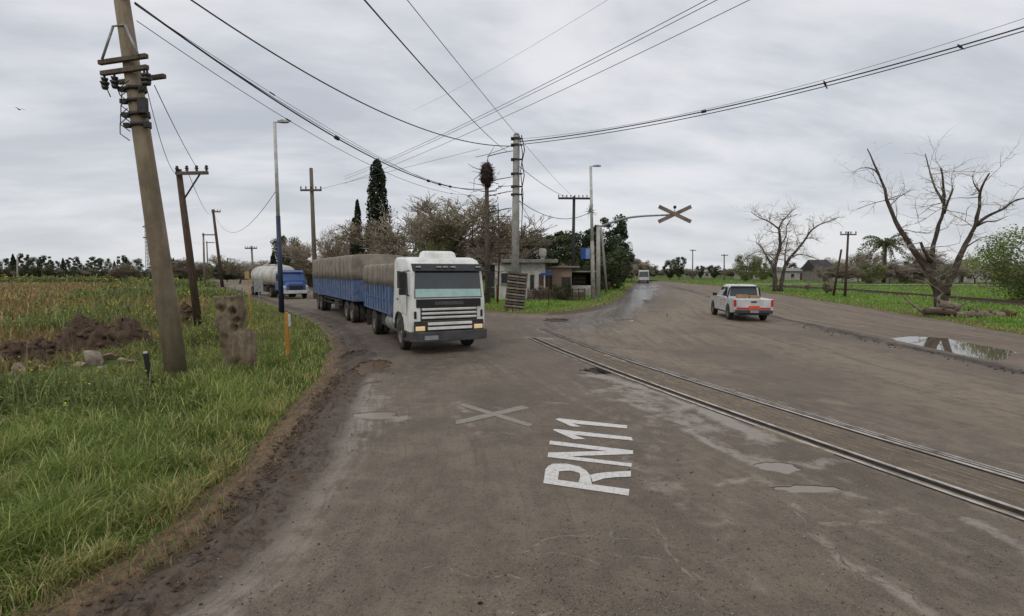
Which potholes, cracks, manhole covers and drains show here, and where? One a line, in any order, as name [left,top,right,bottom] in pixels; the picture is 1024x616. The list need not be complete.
pothole [348,359,393,375]
